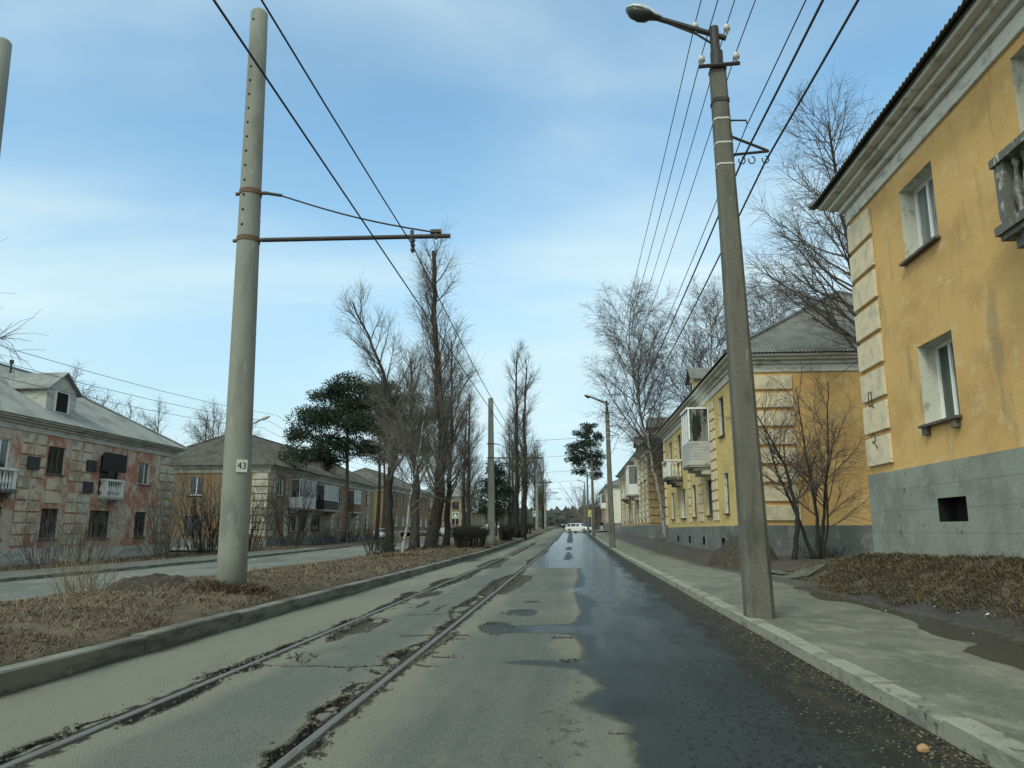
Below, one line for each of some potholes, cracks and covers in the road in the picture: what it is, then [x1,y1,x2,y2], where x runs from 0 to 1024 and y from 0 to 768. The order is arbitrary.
crack [265,634,468,737]
pothole [328,618,388,642]
pothole [480,622,515,634]
